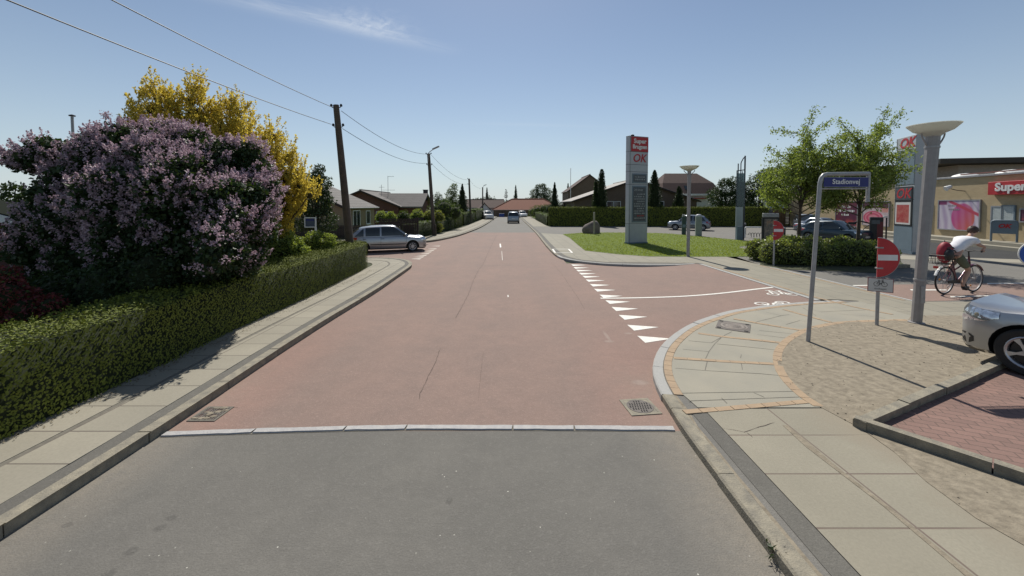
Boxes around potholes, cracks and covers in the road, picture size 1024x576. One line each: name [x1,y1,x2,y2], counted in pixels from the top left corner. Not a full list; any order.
drain grate [619,398,662,416]
manhole cover [715,320,751,333]
